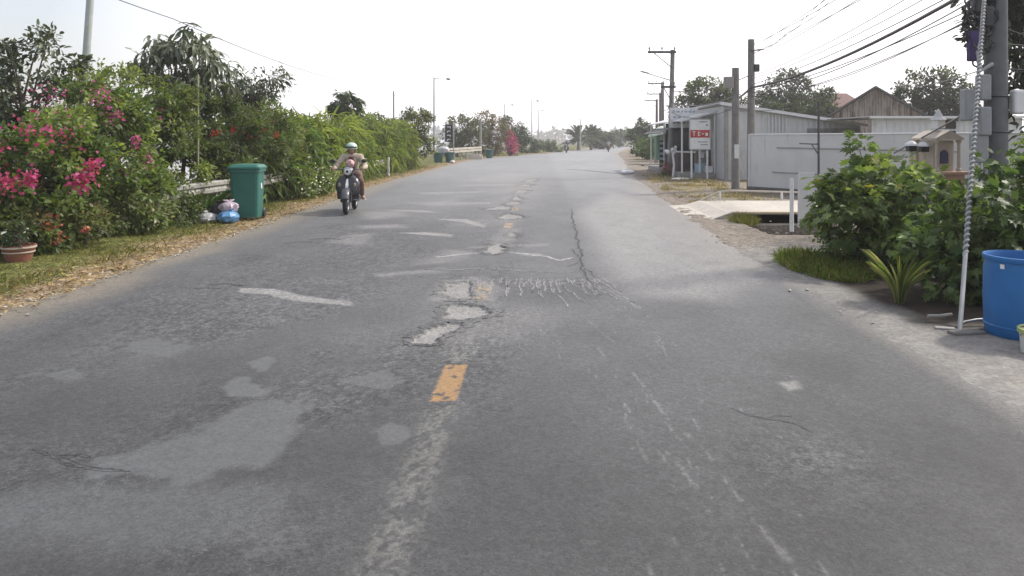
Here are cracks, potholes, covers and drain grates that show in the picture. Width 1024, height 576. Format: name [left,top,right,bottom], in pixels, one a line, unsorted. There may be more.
crack [33,448,130,472]
pothole [428,280,487,302]
crack [418,209,634,308]
pothole [402,318,477,347]
crack [731,408,813,433]
pothole [432,302,505,322]
